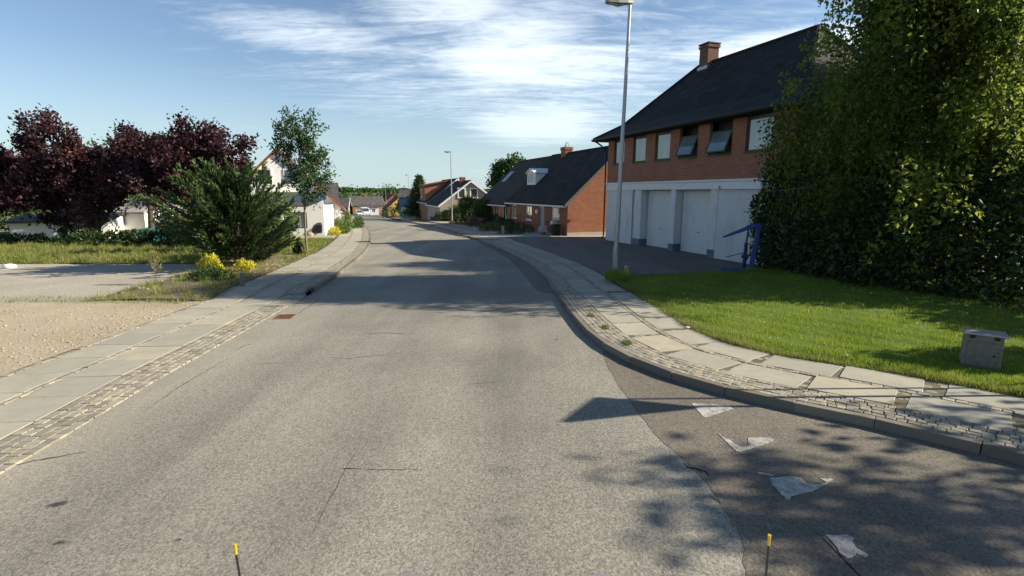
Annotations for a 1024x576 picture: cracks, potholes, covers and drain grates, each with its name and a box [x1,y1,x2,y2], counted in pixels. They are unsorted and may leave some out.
crack [309,455,402,539]
